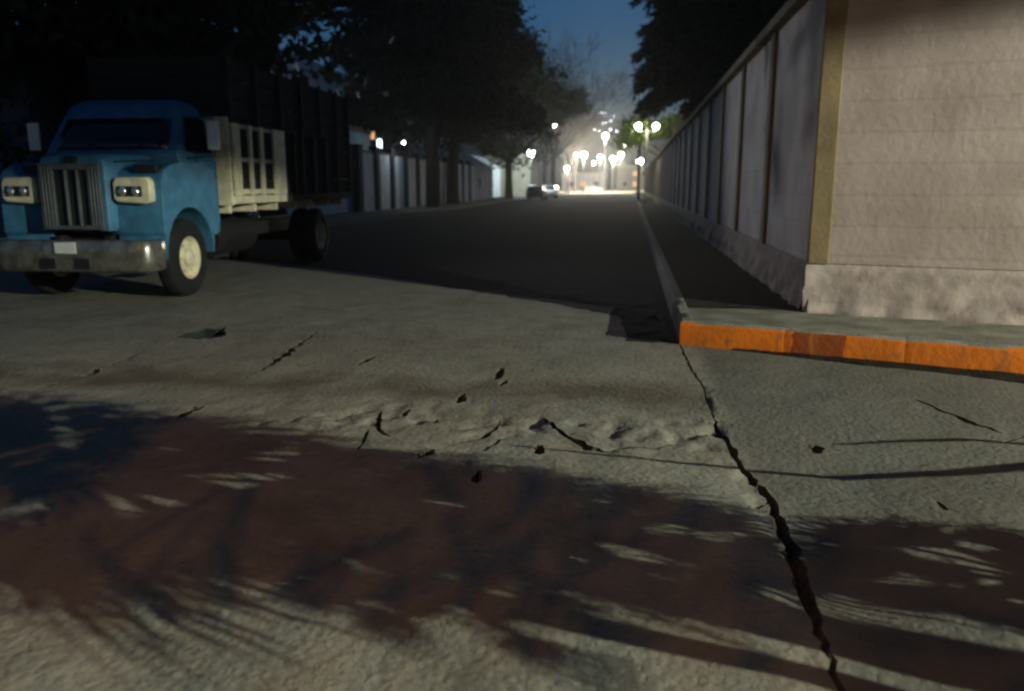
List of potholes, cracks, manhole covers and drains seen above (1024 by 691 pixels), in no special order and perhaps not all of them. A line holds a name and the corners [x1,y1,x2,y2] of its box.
crack [543,344,846,691]
crack [477,420,503,451]
crack [916,399,1024,443]
pothole [177,328,226,340]
crack [357,411,391,450]
crack [242,332,318,380]
